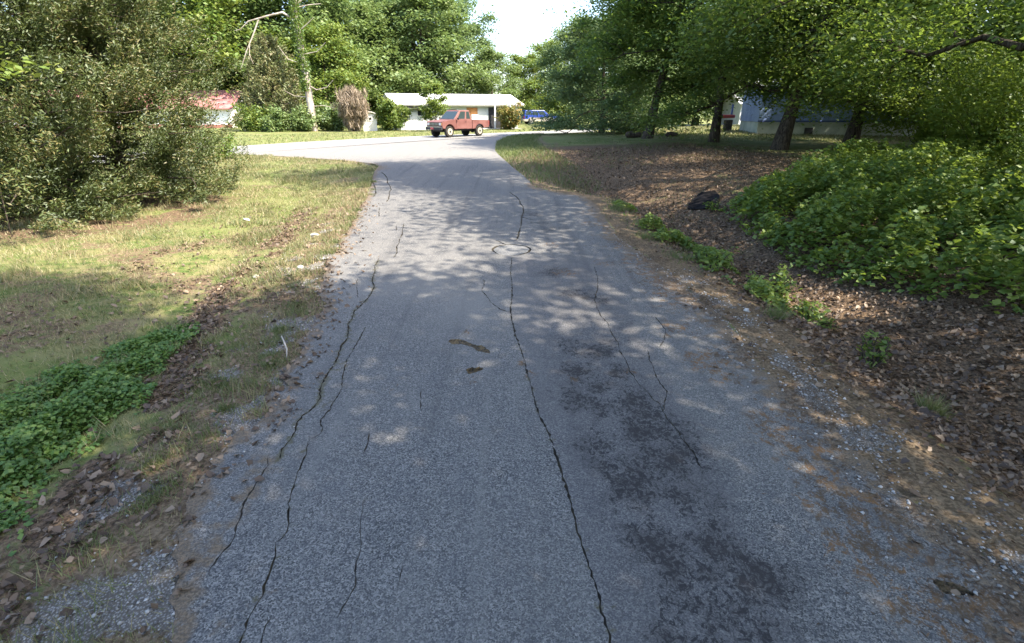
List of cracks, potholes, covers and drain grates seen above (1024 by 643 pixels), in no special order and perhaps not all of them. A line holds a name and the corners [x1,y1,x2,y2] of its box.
pothole [933,579,974,596]
pothole [449,339,490,353]
crack [498,193,528,245]
crack [594,267,701,470]
crack [207,172,404,643]
